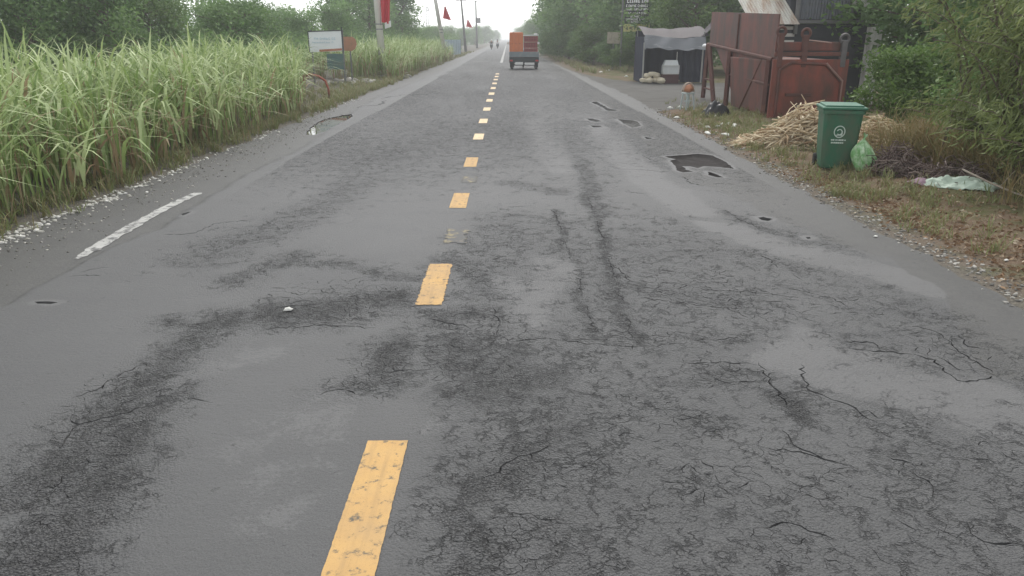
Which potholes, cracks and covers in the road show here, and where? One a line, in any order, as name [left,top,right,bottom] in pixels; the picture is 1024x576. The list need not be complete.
crack [843,326,996,382]
pothole [665,154,734,172]
pothole [305,114,352,135]
pothole [618,119,641,128]
crack [662,356,1023,569]
crack [637,269,862,323]
crack [17,359,207,528]
crack [320,196,737,400]
crack [593,385,721,450]
